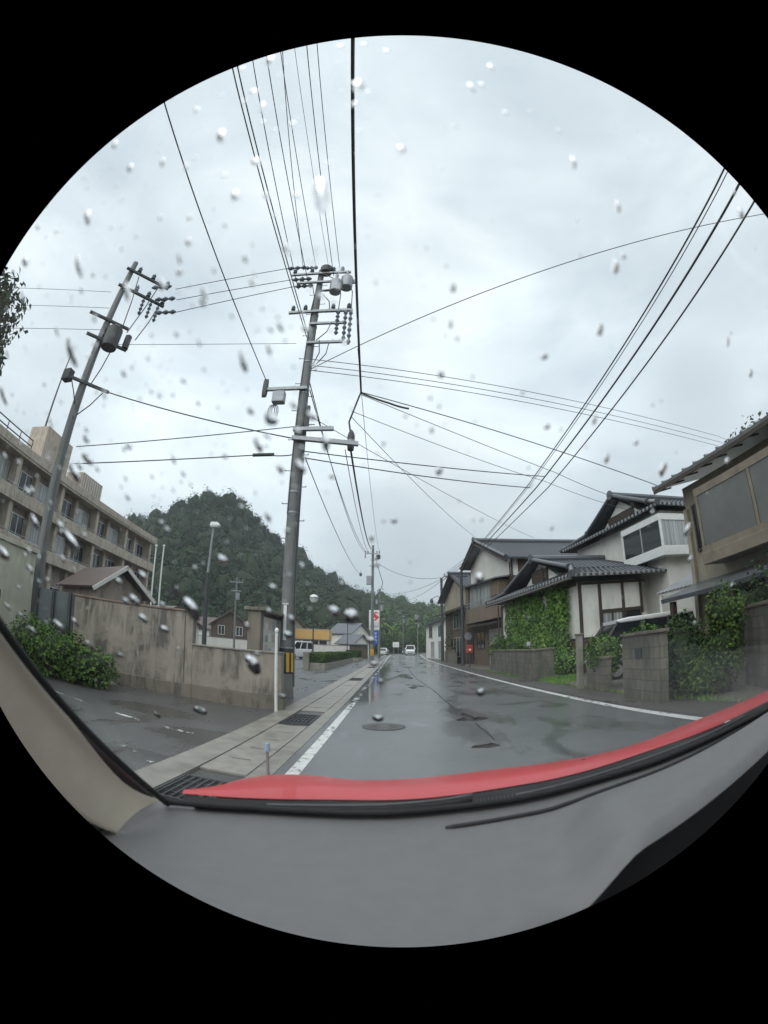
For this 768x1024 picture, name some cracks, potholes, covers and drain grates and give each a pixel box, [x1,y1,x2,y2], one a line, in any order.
drain grate [154,773,229,800]
crack [409,670,504,740]
manhole cover [362,723,406,731]
drain grate [281,713,321,725]
pothole [457,713,488,722]
